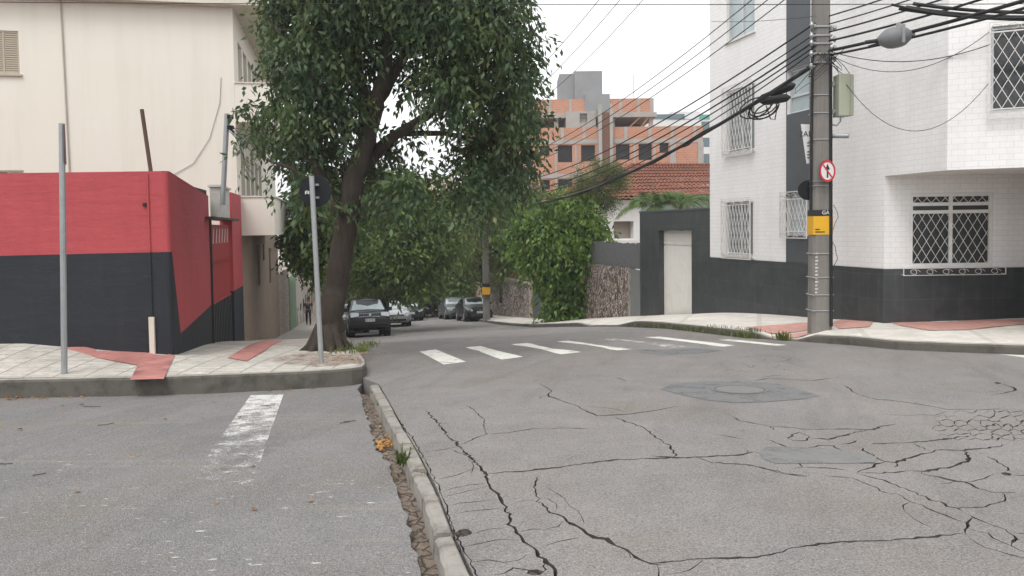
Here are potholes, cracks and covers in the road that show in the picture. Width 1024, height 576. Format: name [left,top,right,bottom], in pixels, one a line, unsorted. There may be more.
crack [426,357,1024,576]
manhole cover [711,385,769,394]
